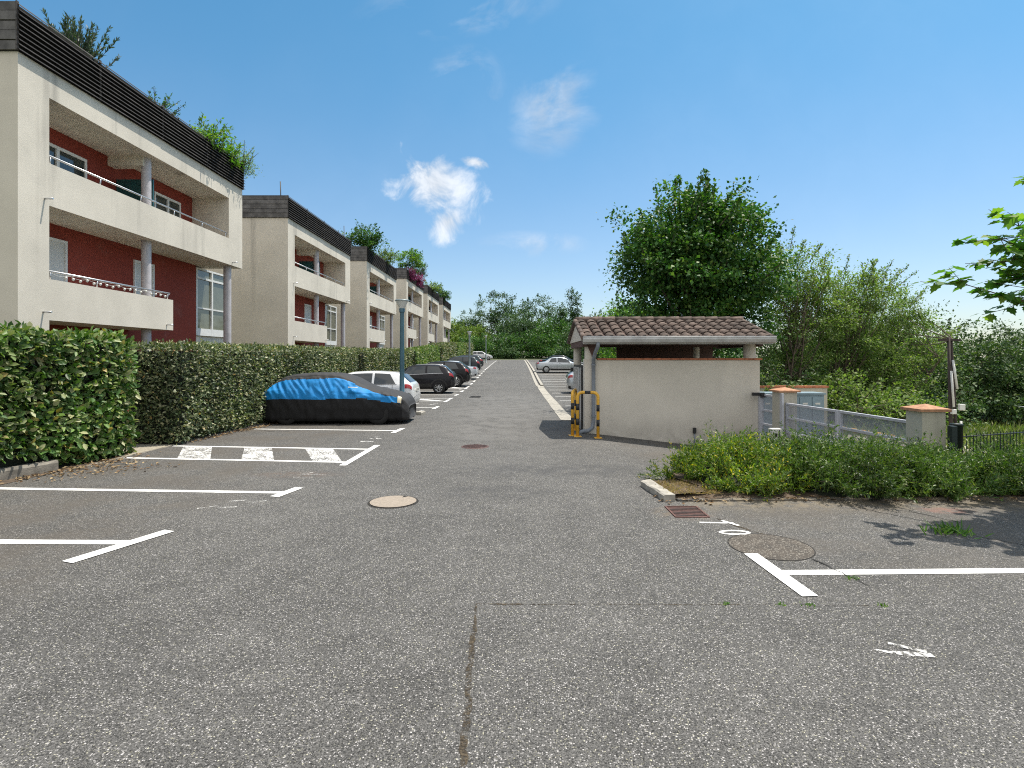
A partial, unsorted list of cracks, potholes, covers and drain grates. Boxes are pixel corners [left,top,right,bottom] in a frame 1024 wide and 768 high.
manhole cover [367,495,419,509]
manhole cover [727,533,816,561]
drain grate [664,506,710,518]
